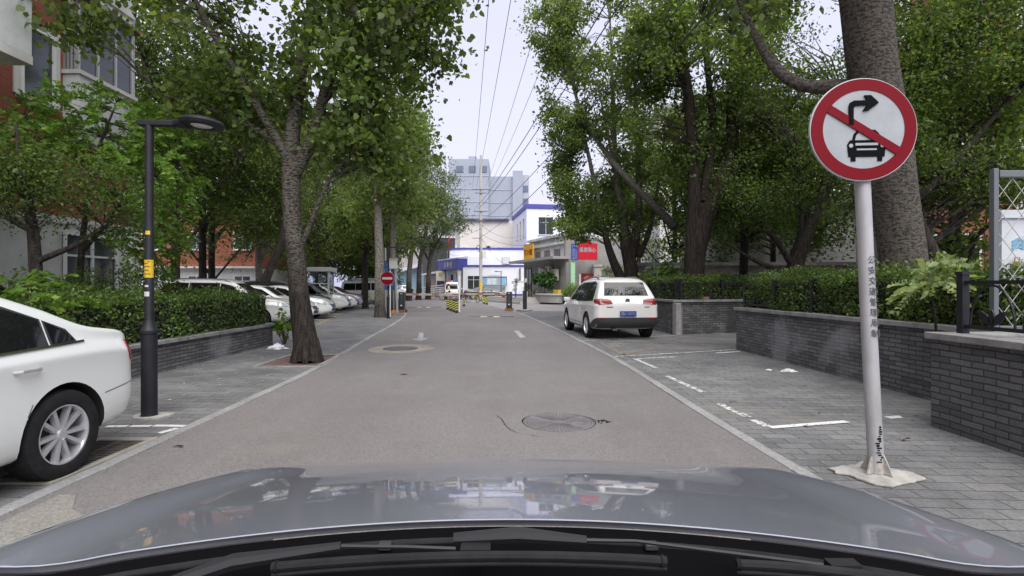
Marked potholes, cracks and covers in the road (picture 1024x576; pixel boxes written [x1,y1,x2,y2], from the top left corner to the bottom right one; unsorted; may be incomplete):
manhole cover [368,344,436,354]
manhole cover [523,413,595,432]
